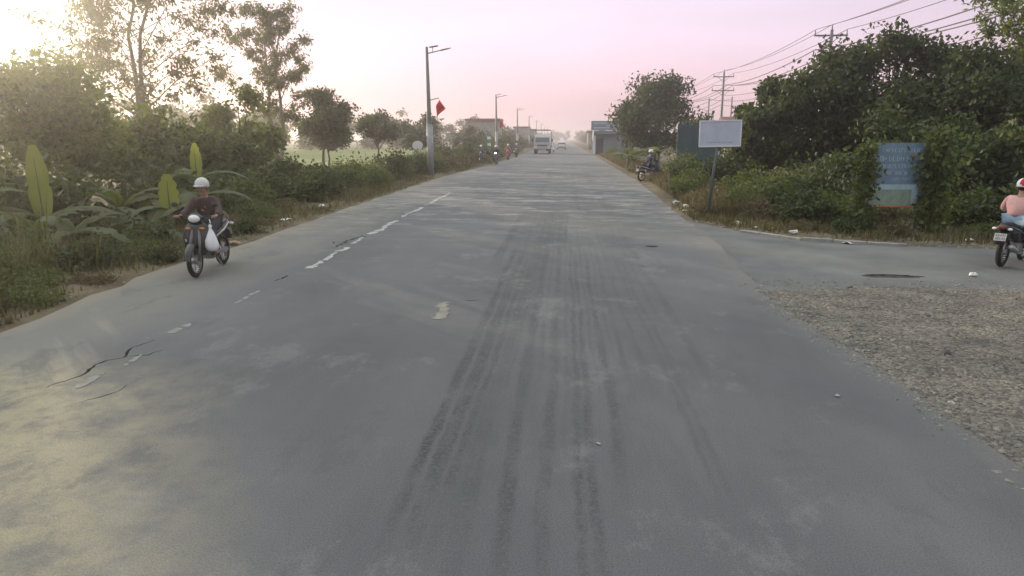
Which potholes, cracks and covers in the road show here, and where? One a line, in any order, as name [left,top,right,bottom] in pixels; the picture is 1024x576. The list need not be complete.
crack [46,340,162,403]
